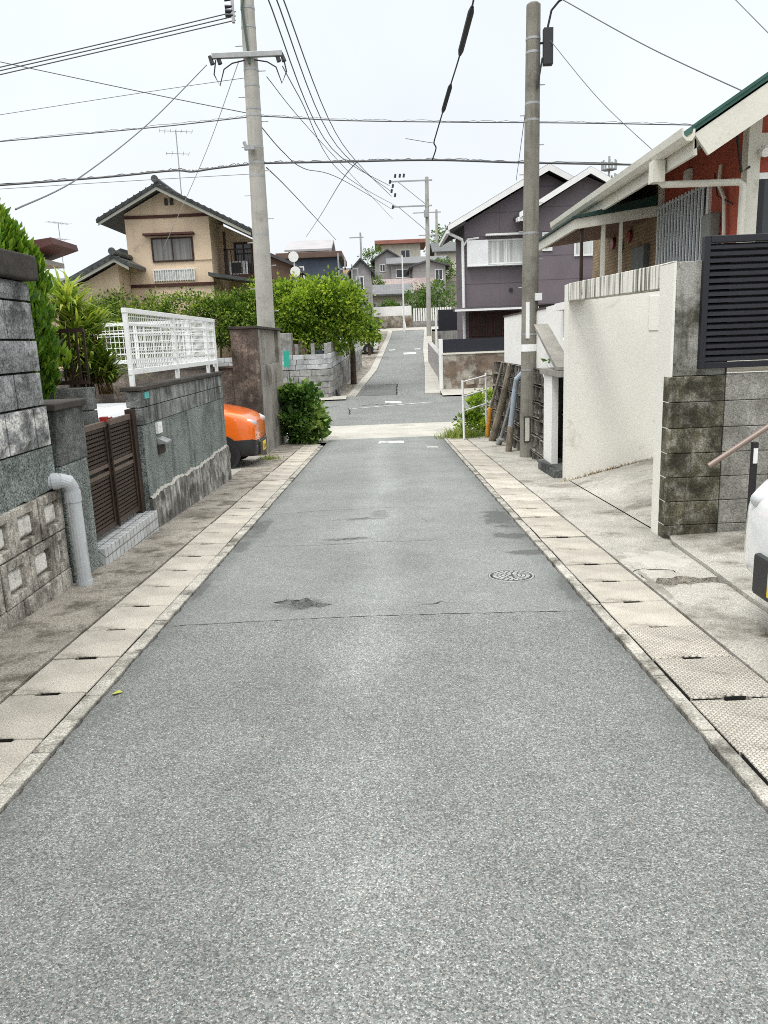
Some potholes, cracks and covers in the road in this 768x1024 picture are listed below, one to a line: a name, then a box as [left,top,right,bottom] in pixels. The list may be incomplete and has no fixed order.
manhole cover [488,570,535,582]
pothole [274,598,332,610]
